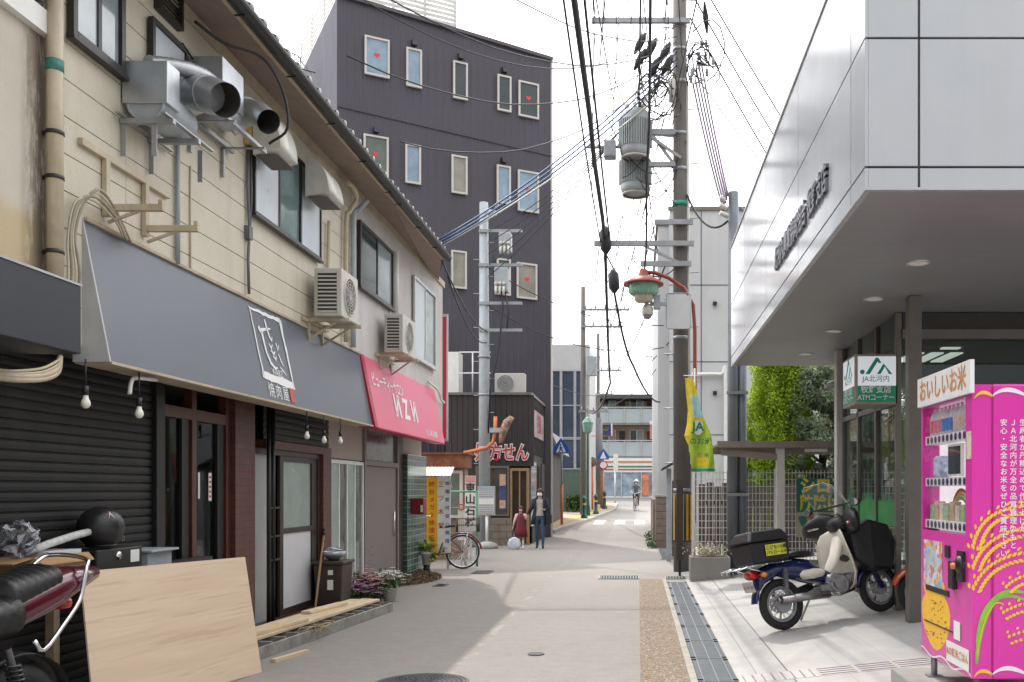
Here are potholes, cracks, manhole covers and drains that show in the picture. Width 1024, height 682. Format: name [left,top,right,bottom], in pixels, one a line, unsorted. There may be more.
manhole cover [375,673,469,682]
